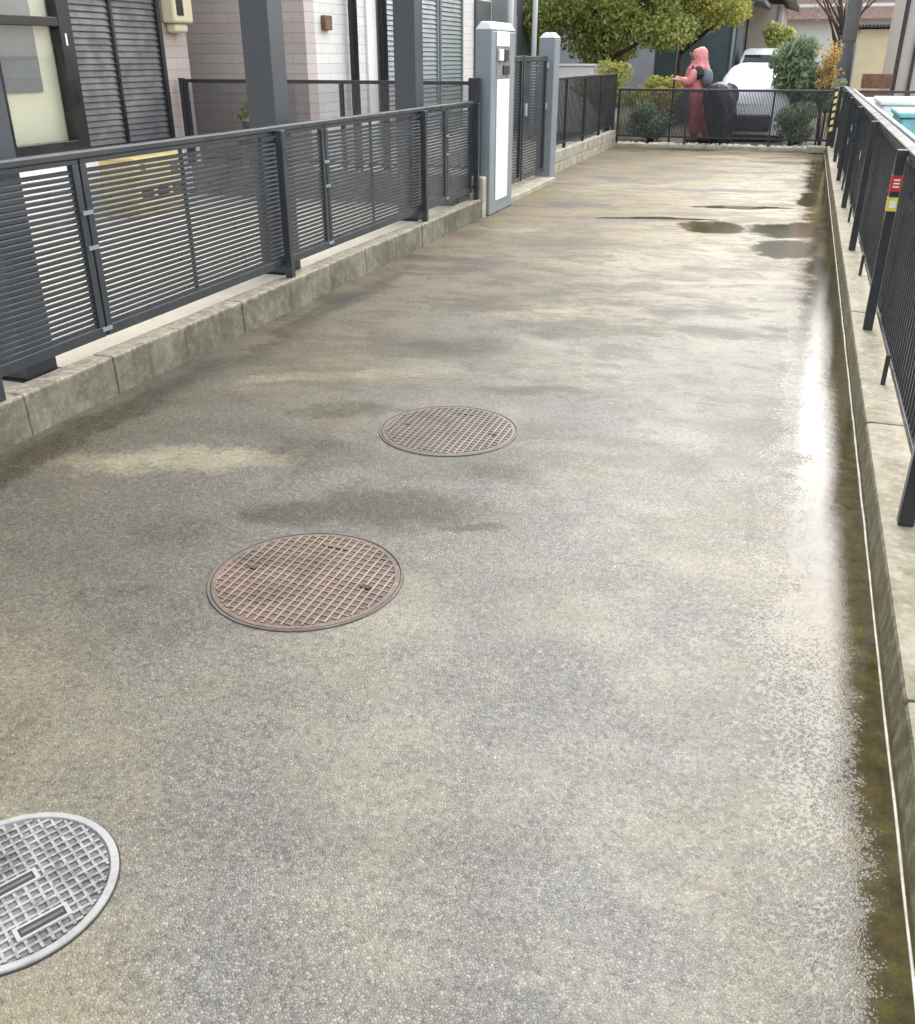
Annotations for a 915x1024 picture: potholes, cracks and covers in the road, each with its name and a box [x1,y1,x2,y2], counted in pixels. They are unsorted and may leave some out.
manhole cover [207,532,404,632]
manhole cover [0,812,121,977]
manhole cover [379,406,518,457]
